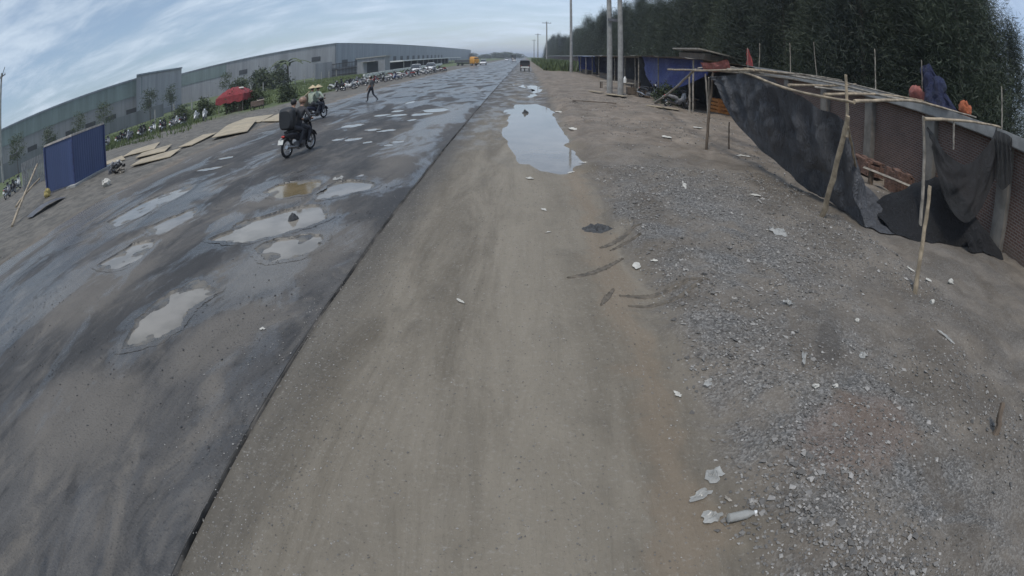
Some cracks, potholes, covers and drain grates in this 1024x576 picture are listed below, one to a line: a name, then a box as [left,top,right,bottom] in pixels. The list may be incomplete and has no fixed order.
pothole [309,178,382,201]
pothole [140,205,202,237]
pothole [257,178,328,200]
pothole [103,182,200,230]
pothole [247,231,332,265]
pothole [115,276,226,354]
pothole [202,202,335,246]
pothole [91,237,161,272]
